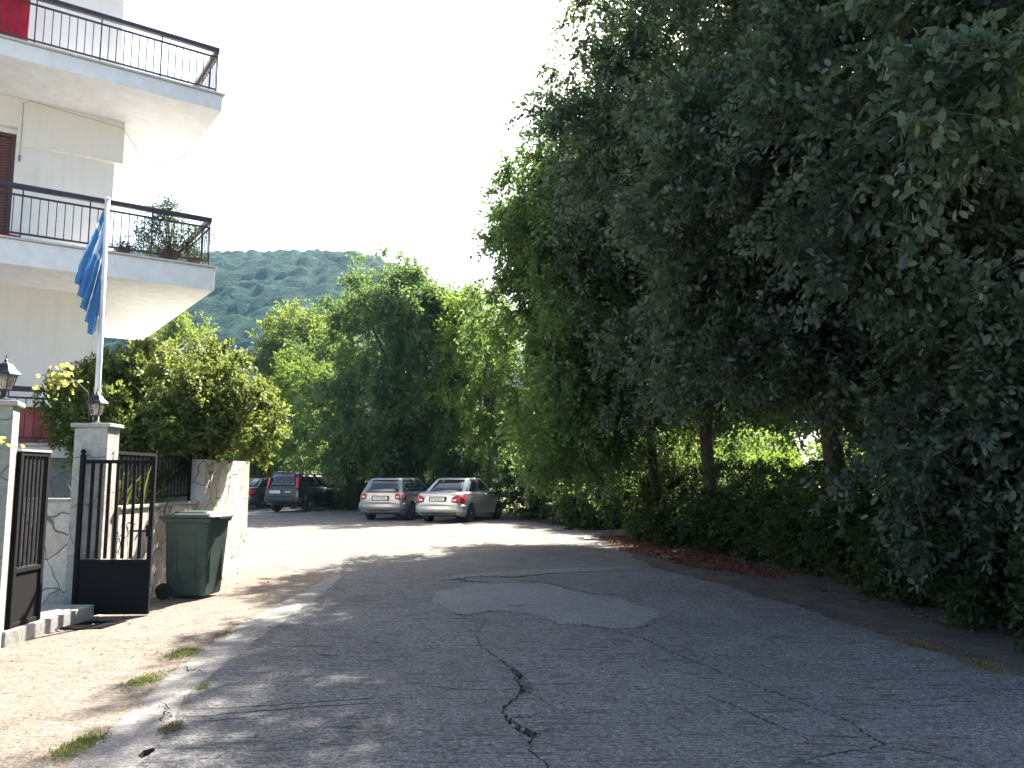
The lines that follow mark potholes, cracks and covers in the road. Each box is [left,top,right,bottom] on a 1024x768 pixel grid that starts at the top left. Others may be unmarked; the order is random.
crack [518,580,648,601]
crack [452,604,566,768]
crack [567,619,992,768]
